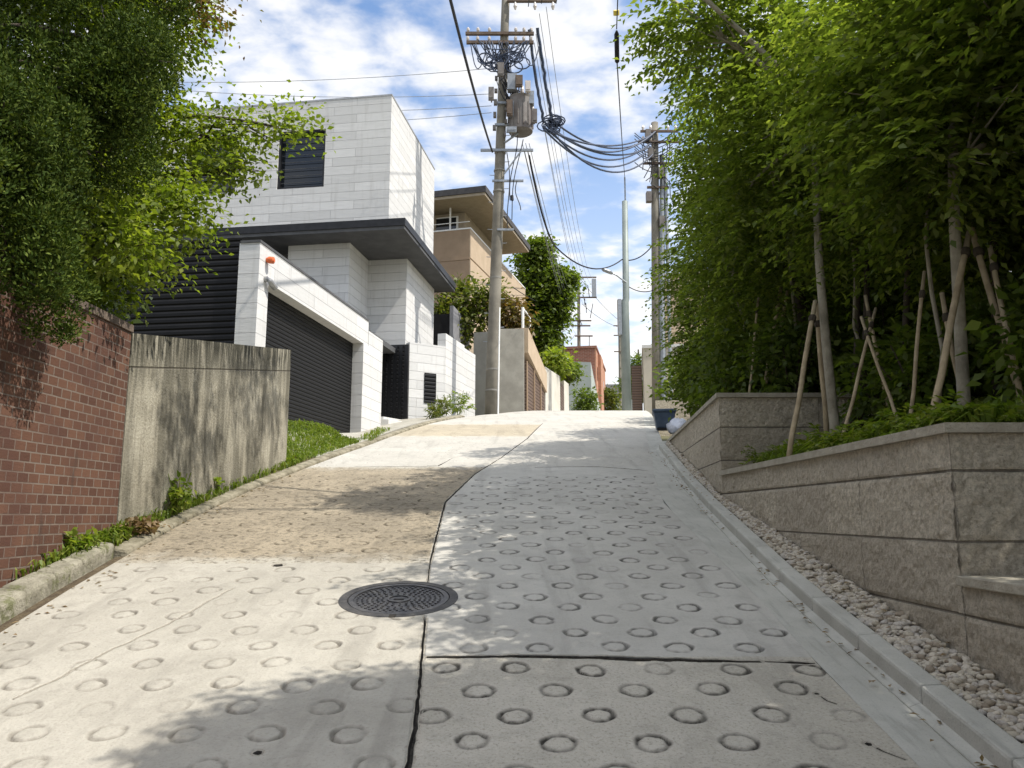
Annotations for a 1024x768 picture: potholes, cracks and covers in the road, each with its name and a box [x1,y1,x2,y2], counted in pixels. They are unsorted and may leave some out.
crack [12,589,232,700]
manhole cover [338,581,458,618]
